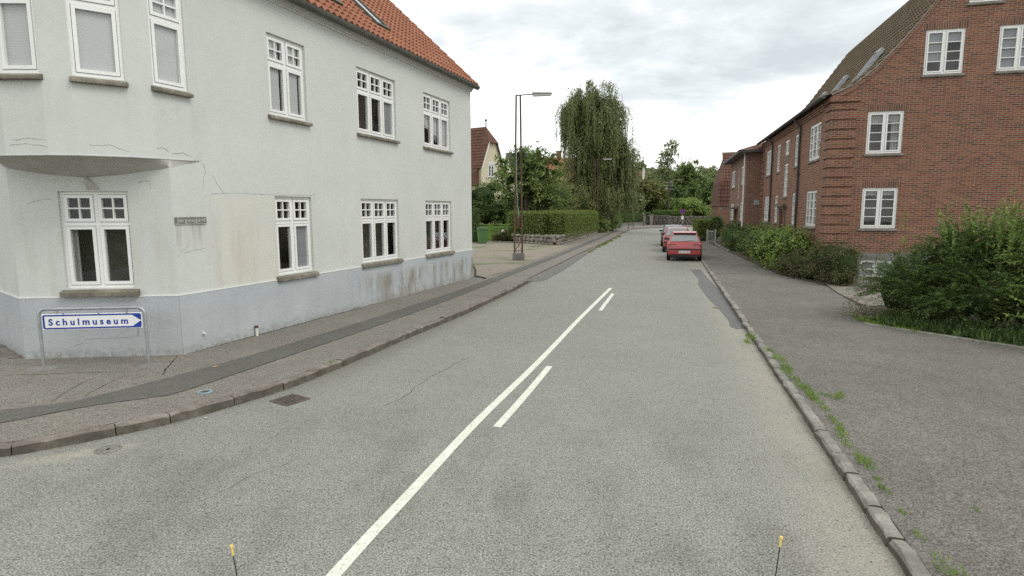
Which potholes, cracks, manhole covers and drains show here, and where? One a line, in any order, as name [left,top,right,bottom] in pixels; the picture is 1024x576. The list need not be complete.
manhole cover [94,444,122,454]
drain grate [269,394,311,406]
